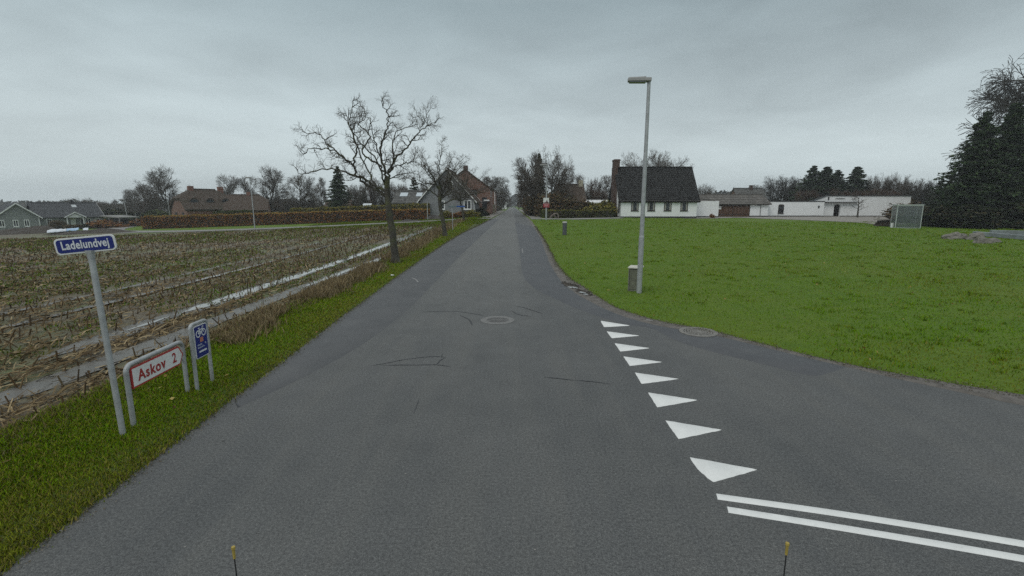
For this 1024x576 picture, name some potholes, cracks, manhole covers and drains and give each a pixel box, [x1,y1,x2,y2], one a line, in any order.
manhole cover [481,316,515,325]
